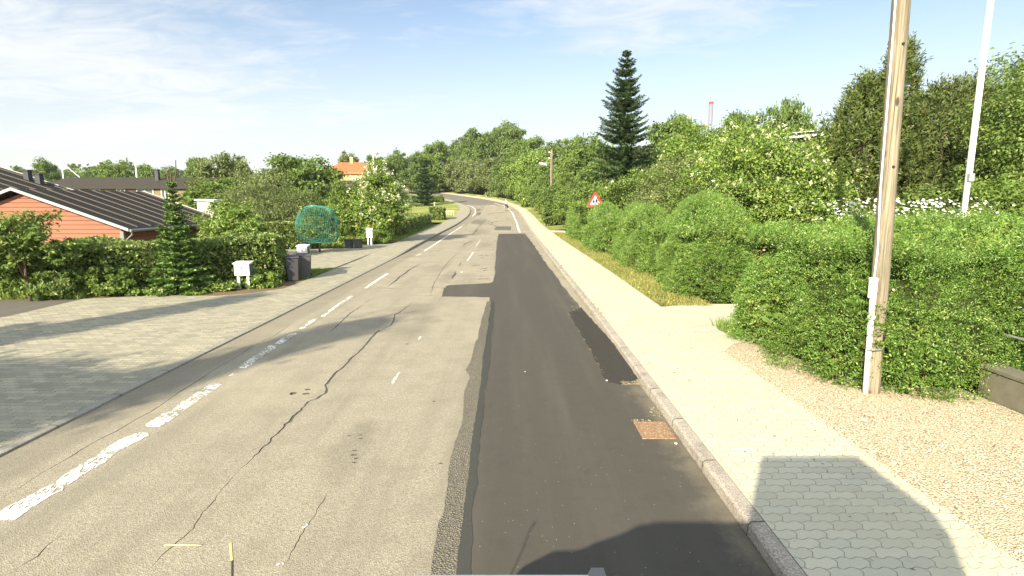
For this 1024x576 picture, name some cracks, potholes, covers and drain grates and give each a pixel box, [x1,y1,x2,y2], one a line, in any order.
crack [155,212,503,563]
manhole cover [633,421,676,439]
